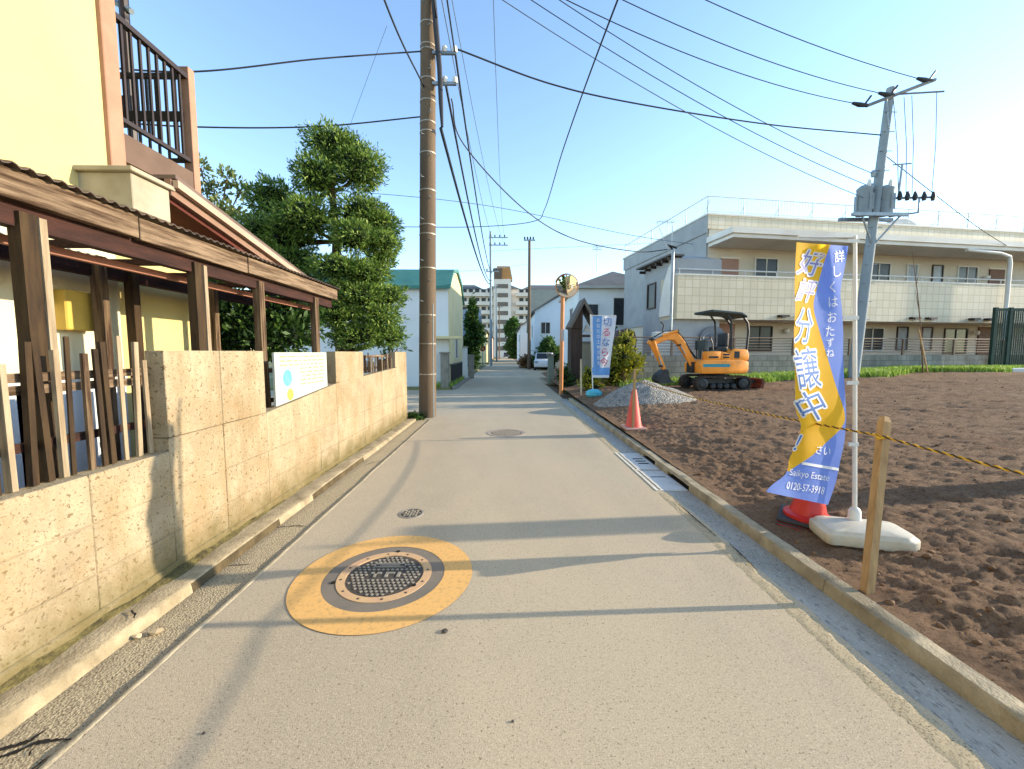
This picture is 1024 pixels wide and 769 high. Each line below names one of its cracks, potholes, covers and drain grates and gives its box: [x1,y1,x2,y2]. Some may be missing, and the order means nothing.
drain grate [614,452,689,491]
manhole cover [331,550,432,603]
manhole cover [487,429,525,437]
utility cover [399,508,424,519]
